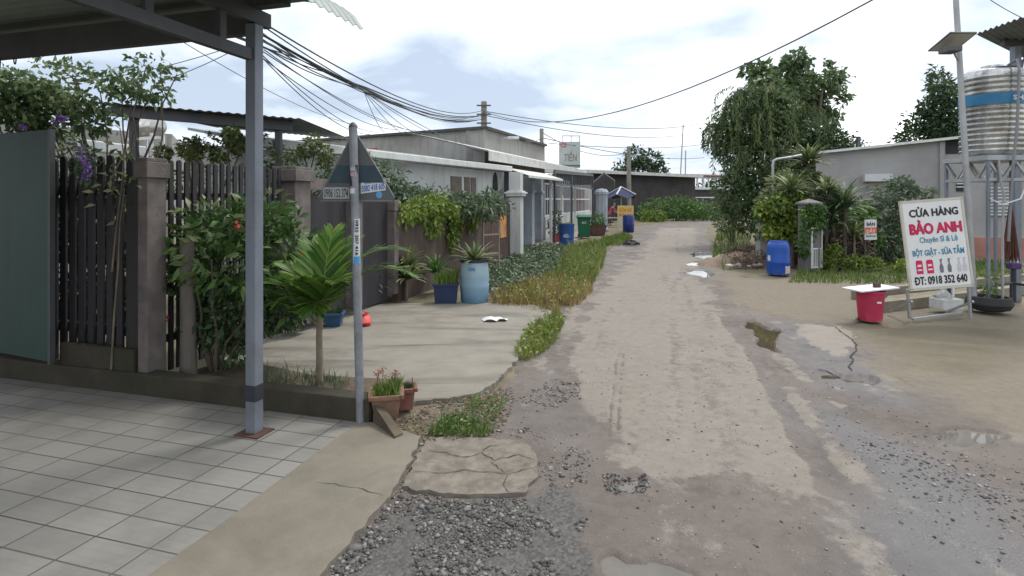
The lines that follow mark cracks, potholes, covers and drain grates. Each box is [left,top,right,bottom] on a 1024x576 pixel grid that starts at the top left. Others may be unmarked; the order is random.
pothole [740,318,785,353]
crack [819,327,861,378]
pothole [811,368,883,388]
pothole [931,424,1014,448]
pothole [601,470,652,495]
pothole [591,547,700,576]
